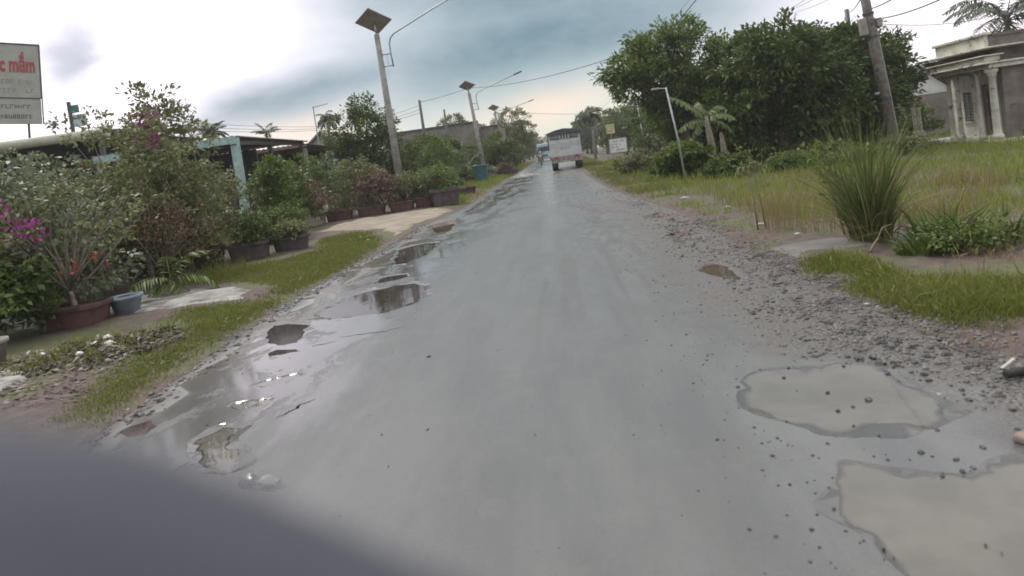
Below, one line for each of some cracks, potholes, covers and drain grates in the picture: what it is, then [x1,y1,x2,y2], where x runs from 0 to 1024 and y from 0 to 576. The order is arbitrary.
pothole [187,422,257,475]
pothole [426,220,458,233]
pothole [307,281,434,320]
pothole [695,262,745,281]
pothole [389,241,441,270]
pothole [119,420,157,437]
pothole [266,324,311,345]
